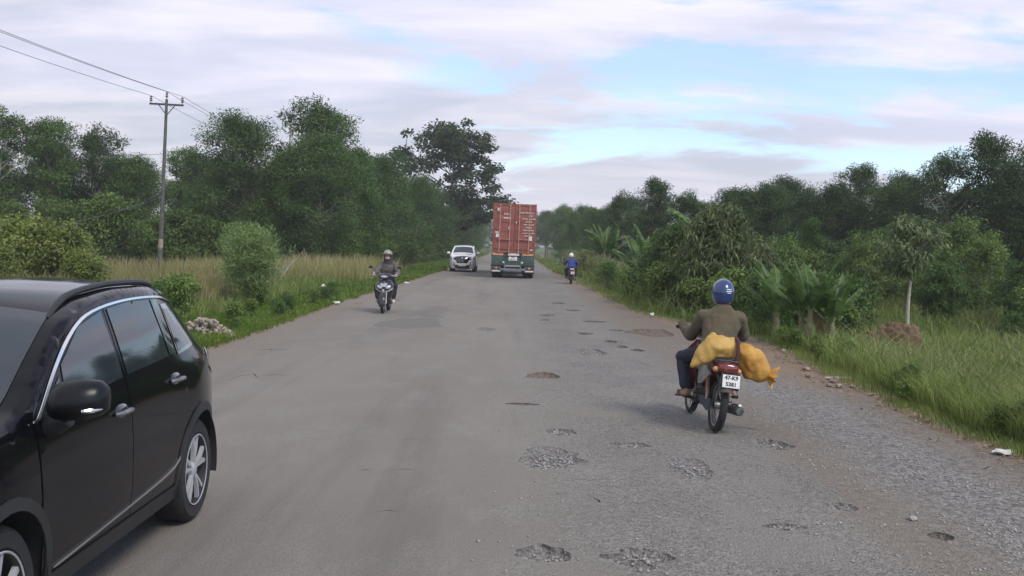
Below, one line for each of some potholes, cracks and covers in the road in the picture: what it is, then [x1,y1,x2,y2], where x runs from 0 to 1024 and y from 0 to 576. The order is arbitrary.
pothole [596,547,676,571]
pothole [665,457,714,481]
pothole [824,502,859,511]
pothole [513,543,571,562]
pothole [573,348,607,356]
pothole [761,523,808,531]
pothole [927,532,955,541]
pothole [518,446,589,469]
pothole [546,428,577,436]
pothole [752,438,796,451]
